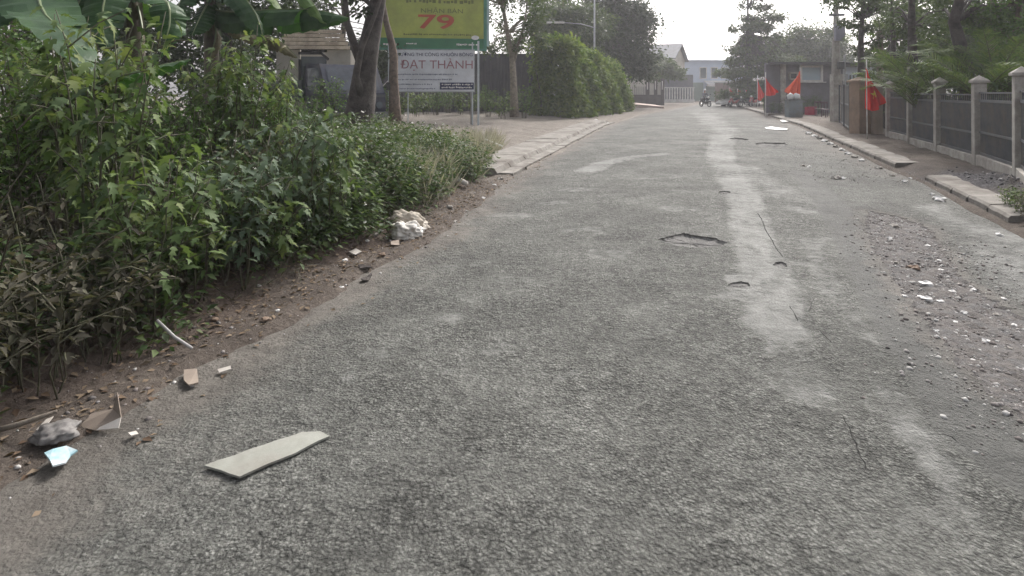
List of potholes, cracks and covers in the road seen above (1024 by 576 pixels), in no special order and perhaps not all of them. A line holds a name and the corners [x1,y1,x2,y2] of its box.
pothole [658,233,727,248]
crack [842,415,867,472]
